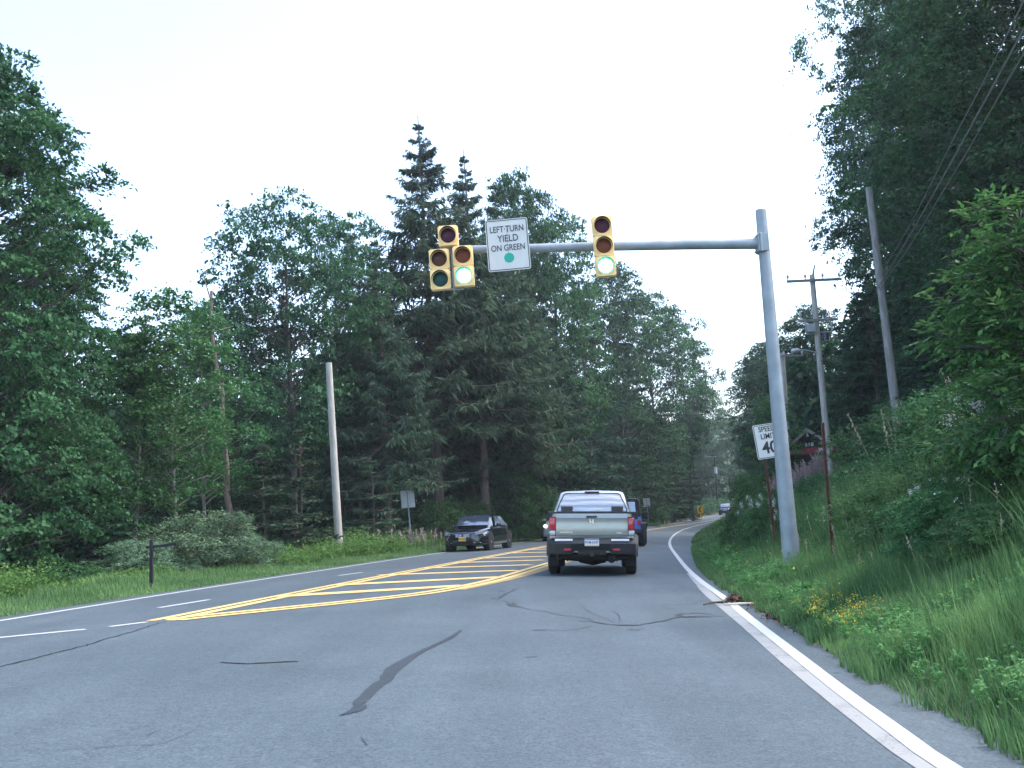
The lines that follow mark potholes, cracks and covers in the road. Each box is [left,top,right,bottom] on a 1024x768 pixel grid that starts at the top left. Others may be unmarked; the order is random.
crack [491,586,710,631]
